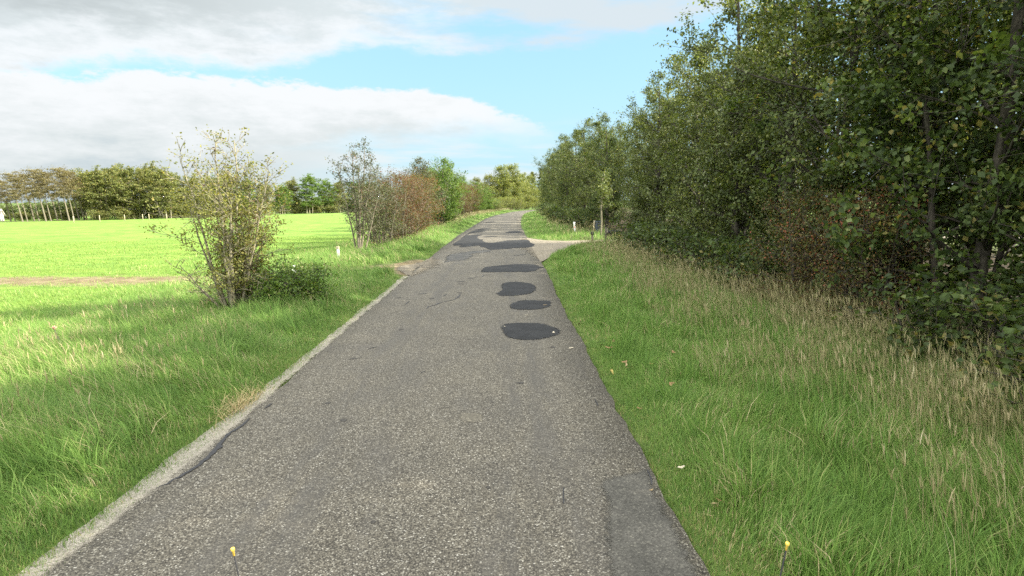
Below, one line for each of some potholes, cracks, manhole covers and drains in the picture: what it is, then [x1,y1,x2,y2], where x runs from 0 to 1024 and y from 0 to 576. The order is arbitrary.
crack [157,403,272,488]
